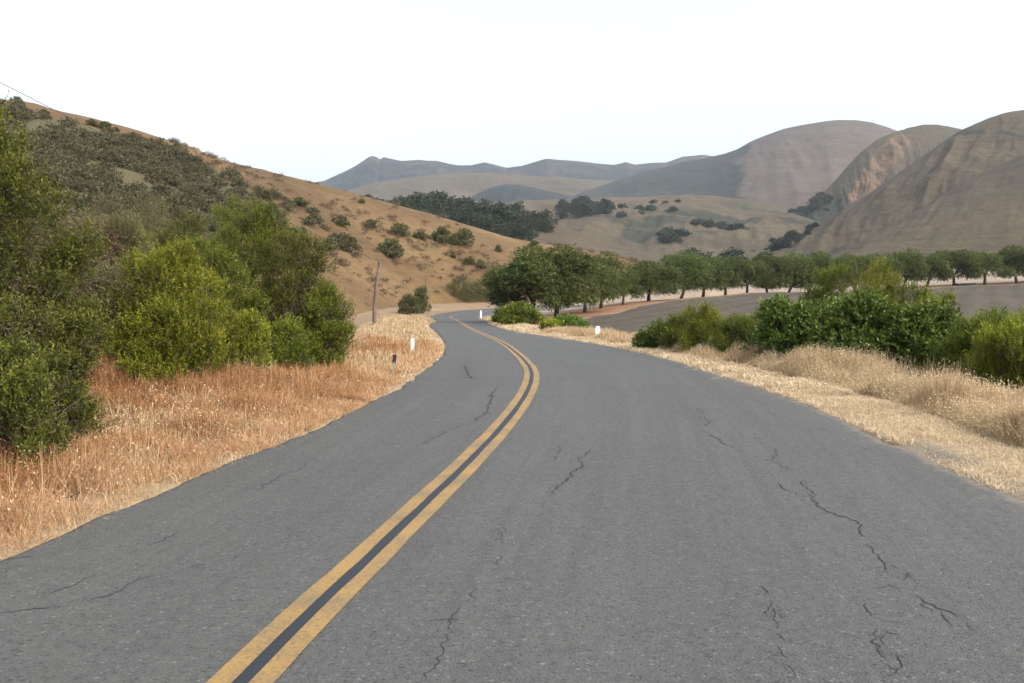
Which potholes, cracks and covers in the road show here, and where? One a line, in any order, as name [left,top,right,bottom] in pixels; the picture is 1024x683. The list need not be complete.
crack [4,561,208,613]
crack [755,585,812,683]
crack [414,526,507,680]
crack [855,597,921,675]
crack [919,597,977,634]
crack [552,446,591,494]
crack [423,365,497,444]
crack [765,449,916,591]
